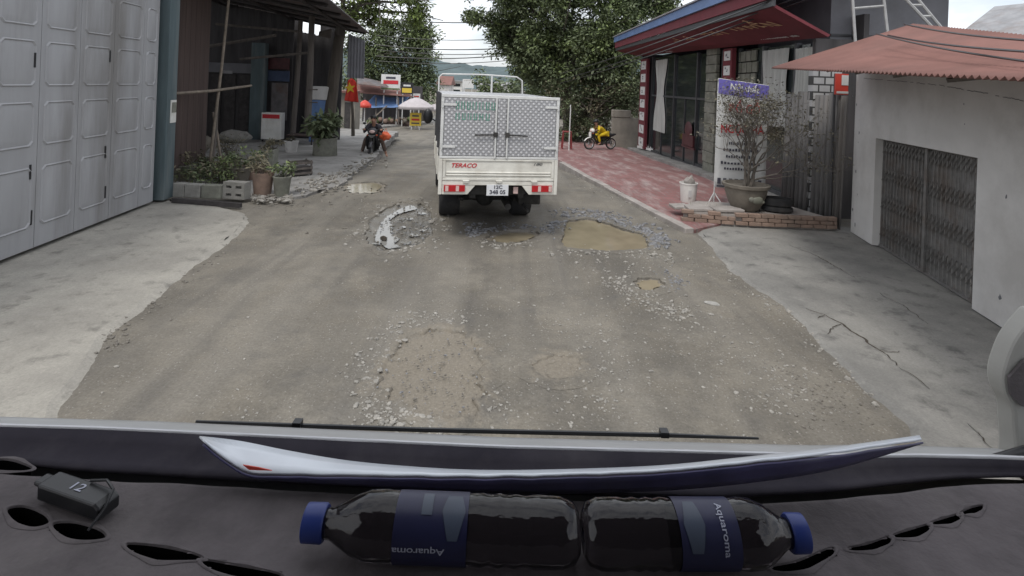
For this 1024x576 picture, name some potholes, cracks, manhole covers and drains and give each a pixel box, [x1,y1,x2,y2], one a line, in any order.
crack [806,293,930,389]
pothole [336,180,395,196]
pothole [619,273,679,296]
pothole [552,216,660,254]
pothole [354,199,445,255]
pothole [475,227,549,246]
